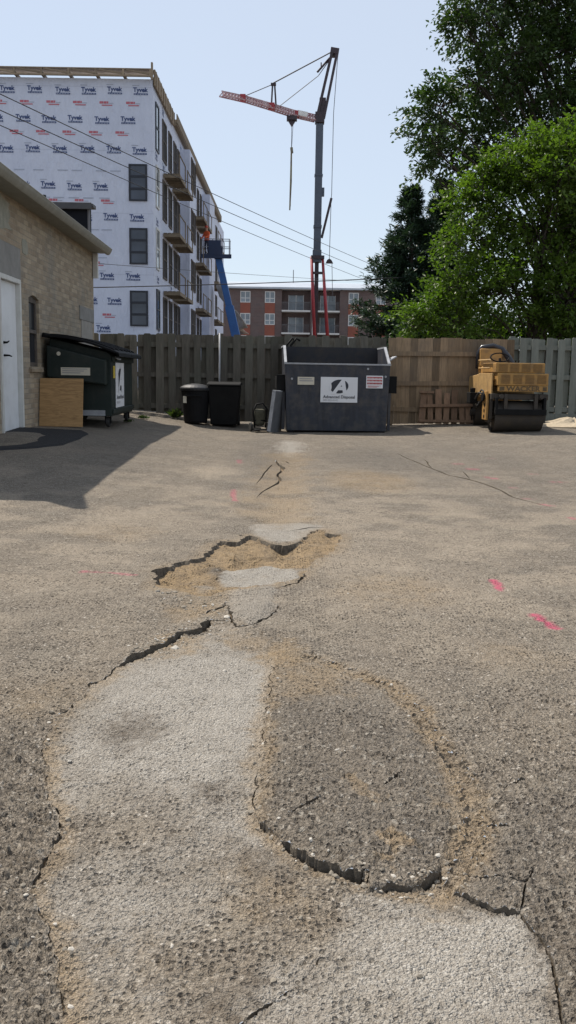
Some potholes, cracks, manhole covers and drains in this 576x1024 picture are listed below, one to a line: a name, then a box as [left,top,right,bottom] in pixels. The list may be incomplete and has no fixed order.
pothole [151,530,344,596]
crack [257,461,289,497]
crack [252,656,564,1024]
crack [399,454,541,505]
crack [30,602,279,1014]
